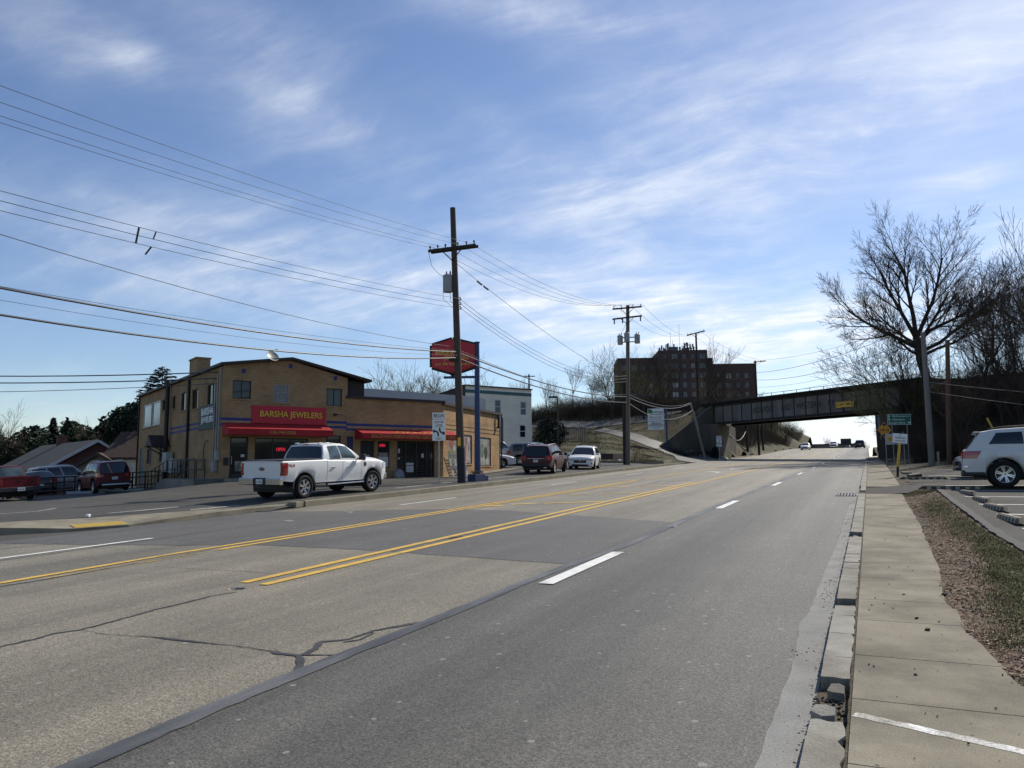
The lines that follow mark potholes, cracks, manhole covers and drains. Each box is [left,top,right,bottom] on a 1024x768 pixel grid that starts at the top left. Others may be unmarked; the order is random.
crack [0,592,271,651]
